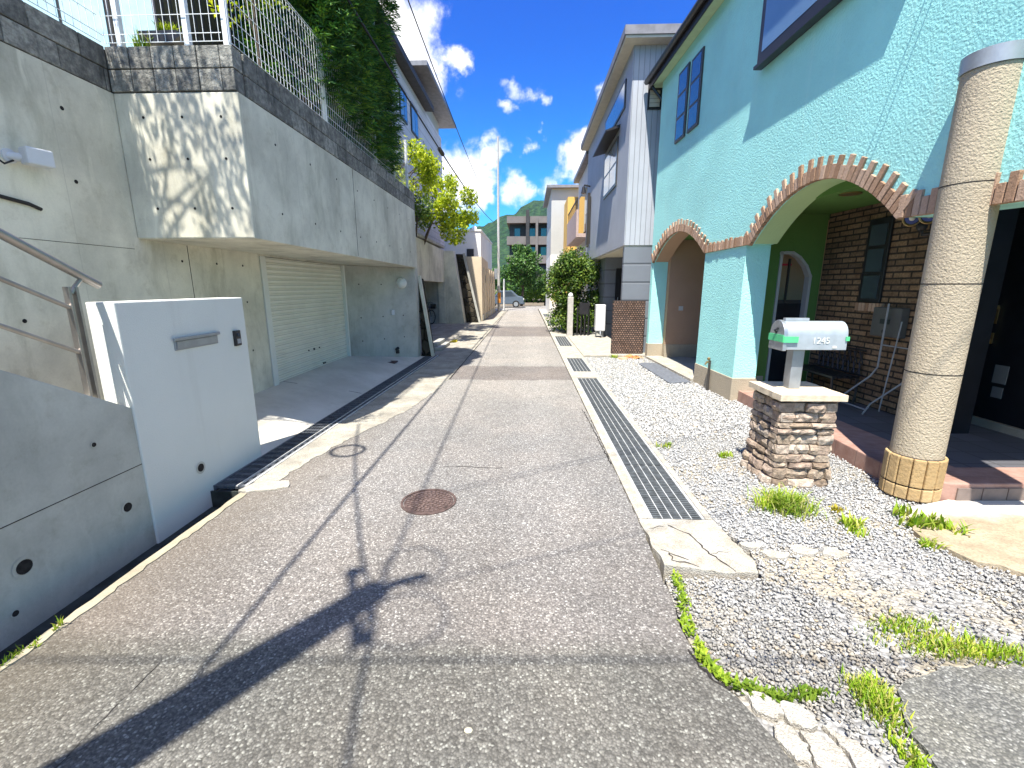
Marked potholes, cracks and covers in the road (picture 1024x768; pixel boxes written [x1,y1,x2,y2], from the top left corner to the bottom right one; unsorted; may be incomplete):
crack [582,410,611,464]
drain grate [622,464,705,520]
manhole cover [401,489,456,515]
crack [654,525,734,570]
drain grate [569,364,593,372]
drain grate [583,390,619,408]
drain grate [576,378,607,391]
drain grate [592,407,637,432]
drain grate [604,430,663,466]
